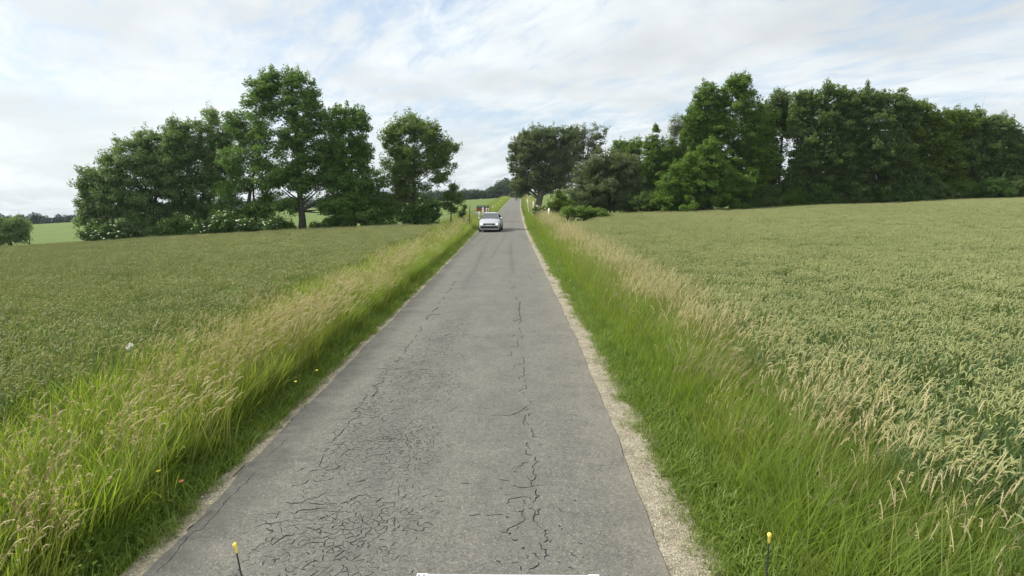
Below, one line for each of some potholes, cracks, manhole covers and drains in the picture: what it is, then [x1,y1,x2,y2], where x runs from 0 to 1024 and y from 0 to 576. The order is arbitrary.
crack [461,276,585,570]
